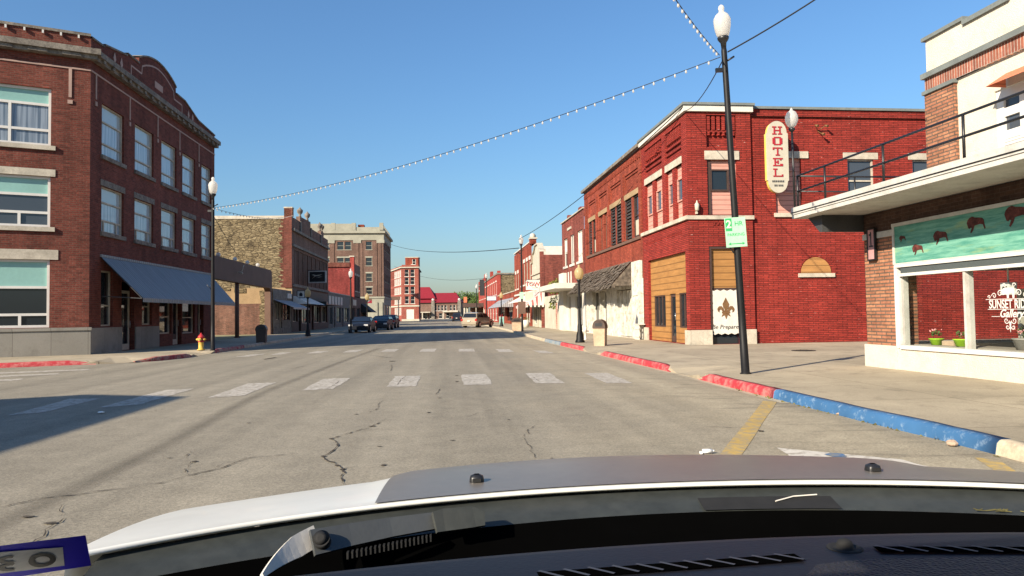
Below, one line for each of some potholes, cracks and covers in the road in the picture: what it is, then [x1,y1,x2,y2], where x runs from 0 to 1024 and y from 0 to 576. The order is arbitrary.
crack [323,401,383,484]
crack [6,451,295,542]
